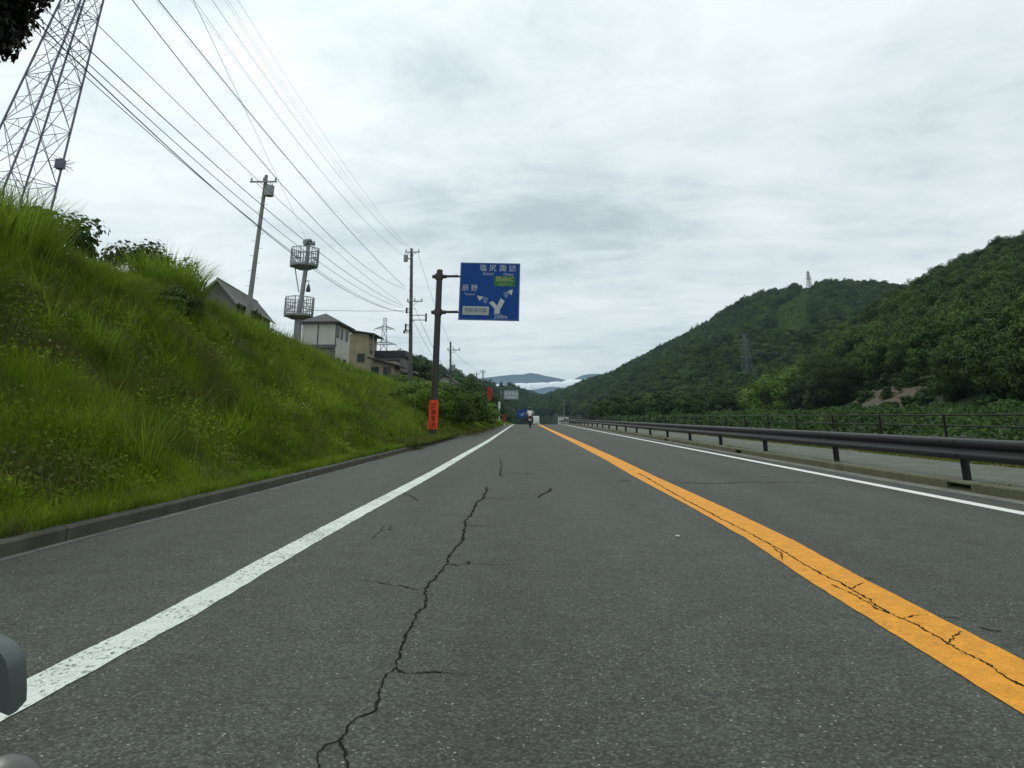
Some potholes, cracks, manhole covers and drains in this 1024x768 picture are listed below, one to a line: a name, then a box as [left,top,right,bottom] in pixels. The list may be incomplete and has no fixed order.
crack [316,458,552,768]
